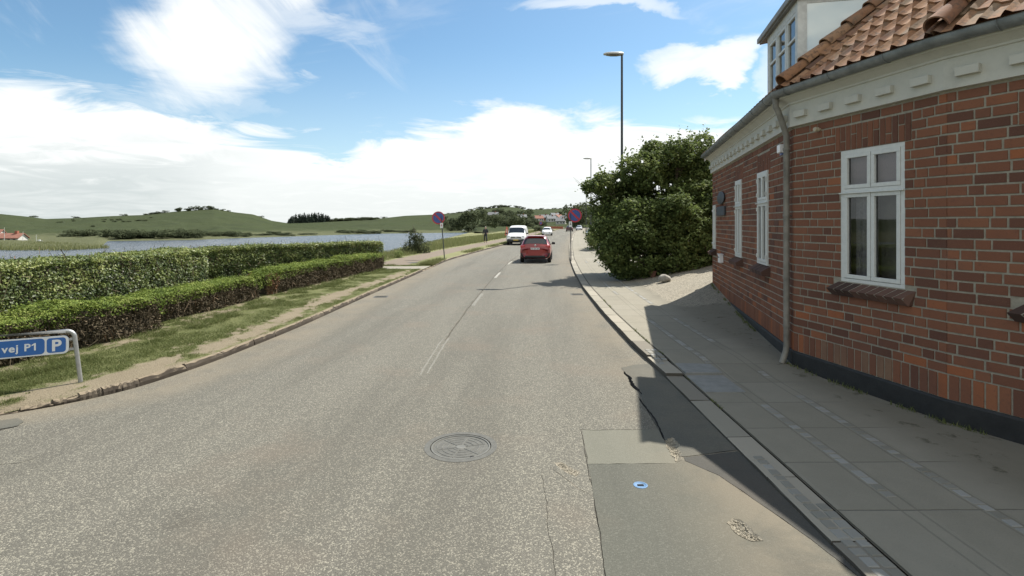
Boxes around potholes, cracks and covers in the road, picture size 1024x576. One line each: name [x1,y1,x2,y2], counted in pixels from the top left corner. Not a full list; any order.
pothole [727,518,763,542]
pothole [555,462,581,476]
pothole [665,437,682,462]
crack [541,372,665,576]
manhole cover [424,432,497,462]
